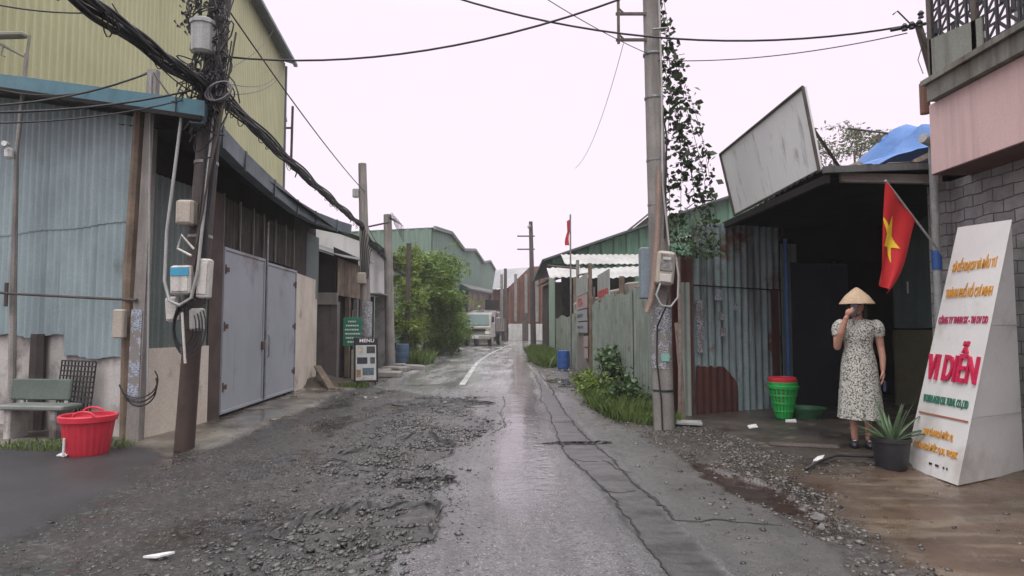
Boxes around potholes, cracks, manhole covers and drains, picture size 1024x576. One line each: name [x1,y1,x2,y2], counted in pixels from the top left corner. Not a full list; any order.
pothole [270,499,444,560]
crack [464,396,506,434]
pothole [392,399,496,410]
pothole [331,431,459,472]
pothole [393,474,456,491]
